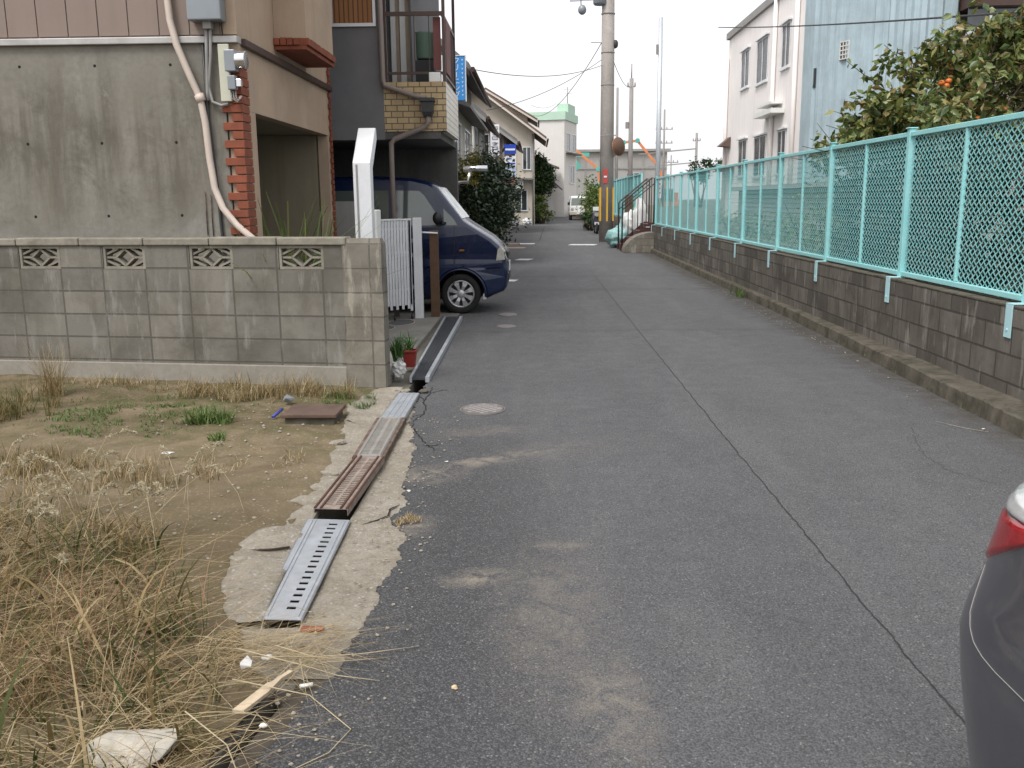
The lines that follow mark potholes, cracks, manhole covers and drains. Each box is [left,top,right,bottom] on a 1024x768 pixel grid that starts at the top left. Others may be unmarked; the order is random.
manhole cover [460,403,506,416]
crack [409,387,442,451]
